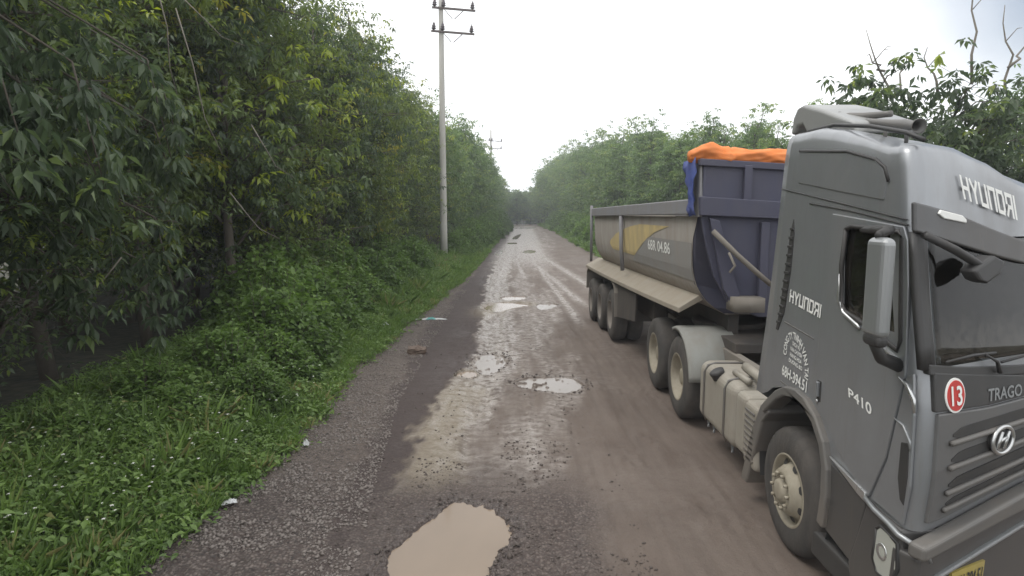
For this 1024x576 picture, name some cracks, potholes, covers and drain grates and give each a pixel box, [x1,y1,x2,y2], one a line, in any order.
pothole [466,353,509,376]
pothole [478,301,536,313]
pothole [510,376,589,395]
pothole [454,369,479,379]
pothole [372,498,520,576]
pothole [535,302,560,310]
